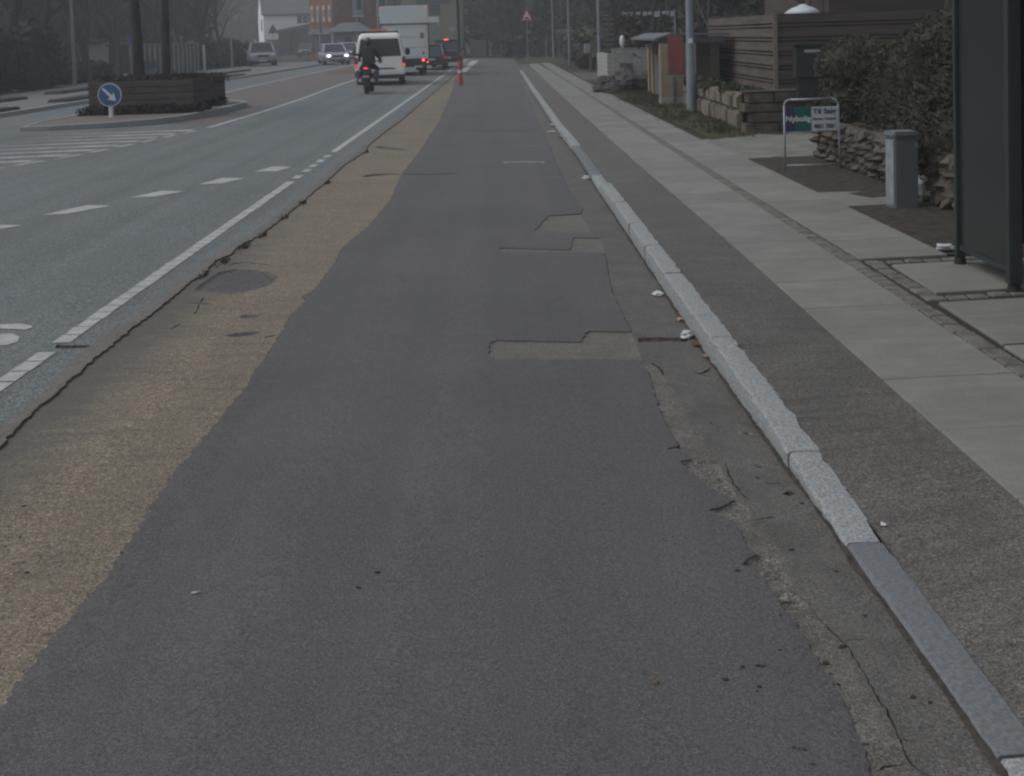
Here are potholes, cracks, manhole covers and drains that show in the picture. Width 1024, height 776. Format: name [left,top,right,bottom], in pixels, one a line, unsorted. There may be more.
crack [795,590,929,776]
crack [725,465,748,499]
